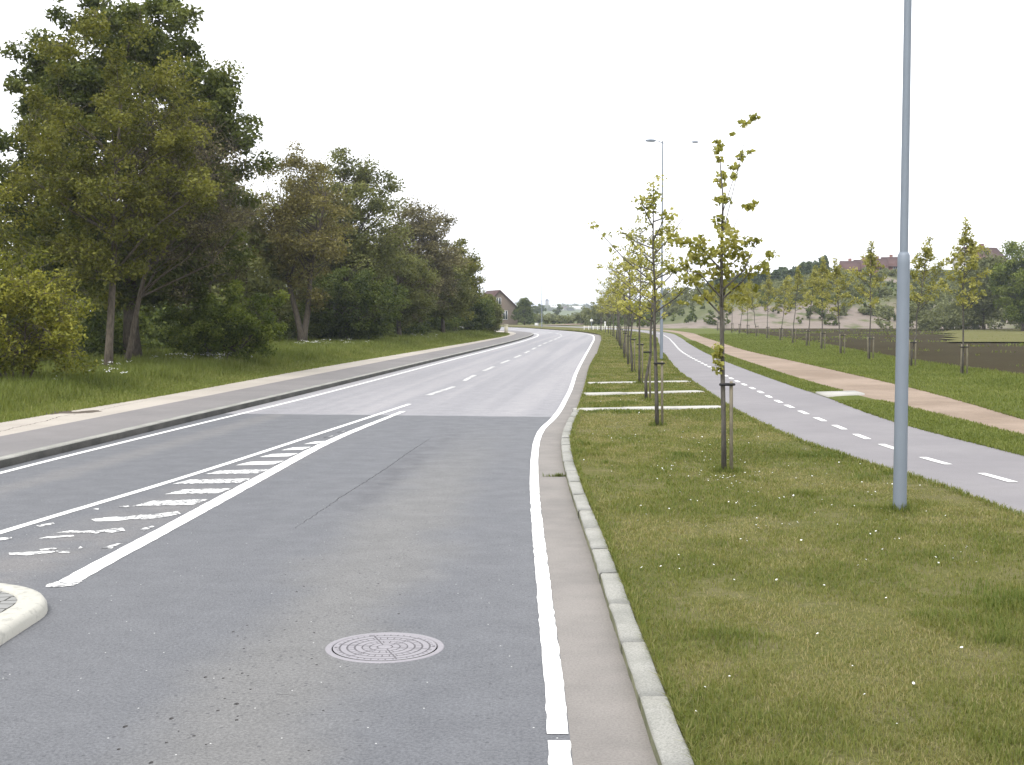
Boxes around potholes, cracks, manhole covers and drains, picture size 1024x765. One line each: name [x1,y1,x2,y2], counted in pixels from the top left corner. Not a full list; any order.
crack [298,439,429,526]
manhole cover [325,632,444,663]
